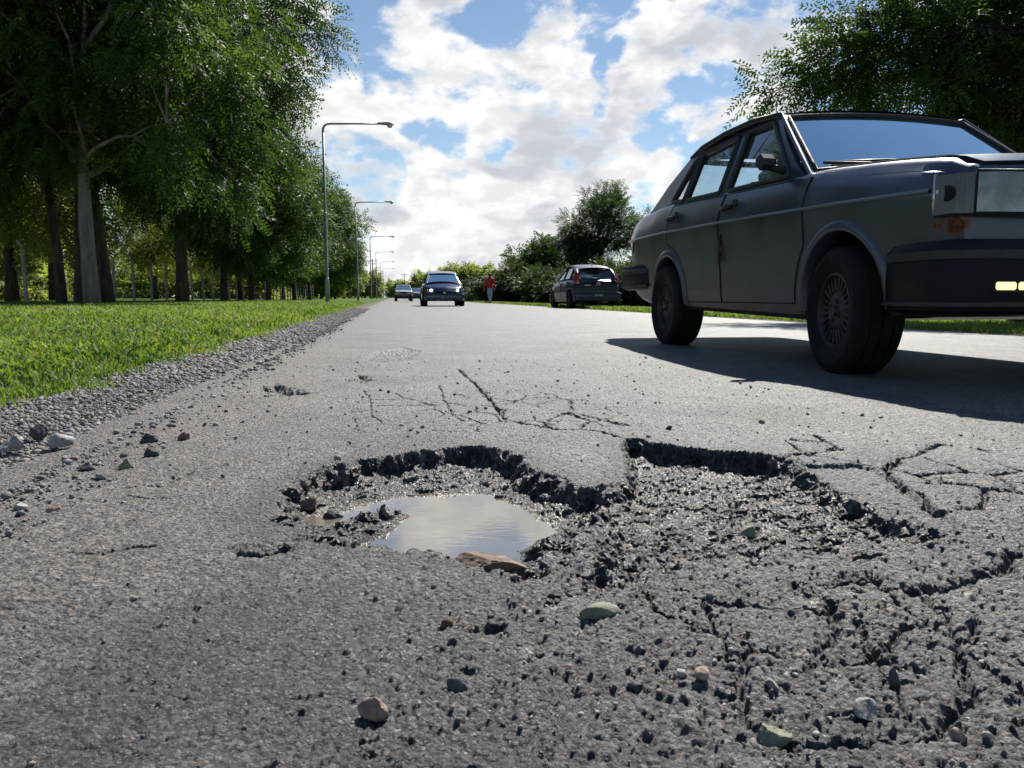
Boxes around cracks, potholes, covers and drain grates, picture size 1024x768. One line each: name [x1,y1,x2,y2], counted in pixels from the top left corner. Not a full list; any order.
crack [640,435,1024,755]
pothole [264,438,961,635]
crack [352,369,642,439]
pothole [250,384,318,397]
